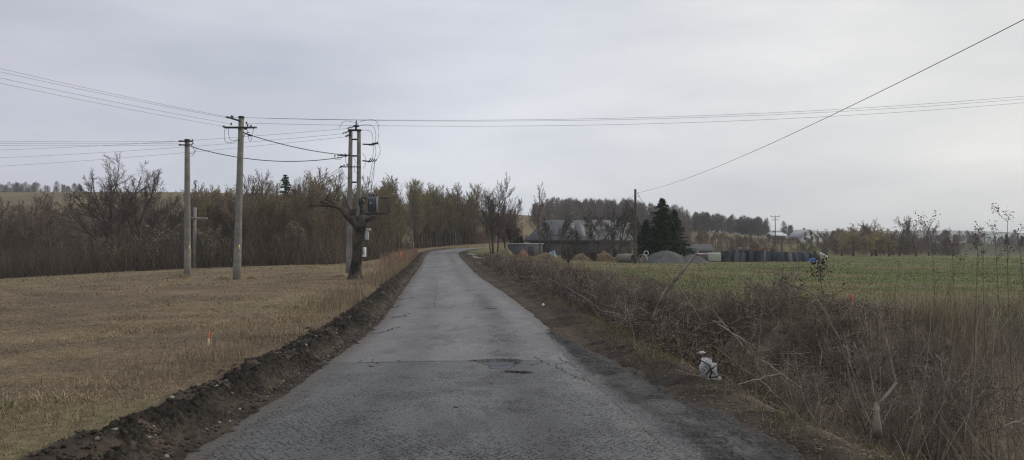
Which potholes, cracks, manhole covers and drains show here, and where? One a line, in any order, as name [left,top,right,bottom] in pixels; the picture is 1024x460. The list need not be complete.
pothole [467,358,523,369]
crack [204,356,674,460]
